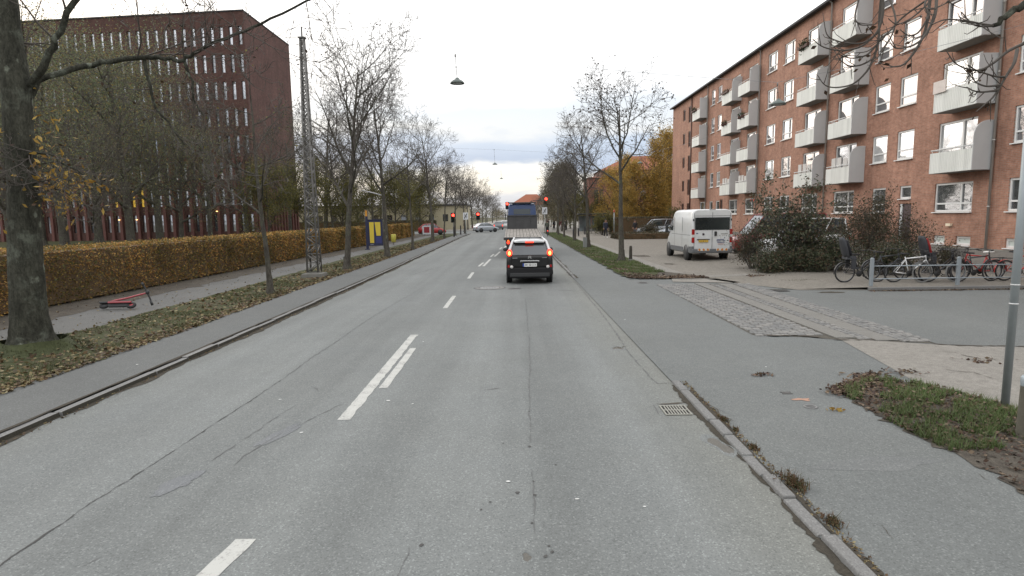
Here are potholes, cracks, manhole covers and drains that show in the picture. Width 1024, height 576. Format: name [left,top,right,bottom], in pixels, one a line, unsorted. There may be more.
crack [0,298,404,566]
drain grate [659,405,693,415]
